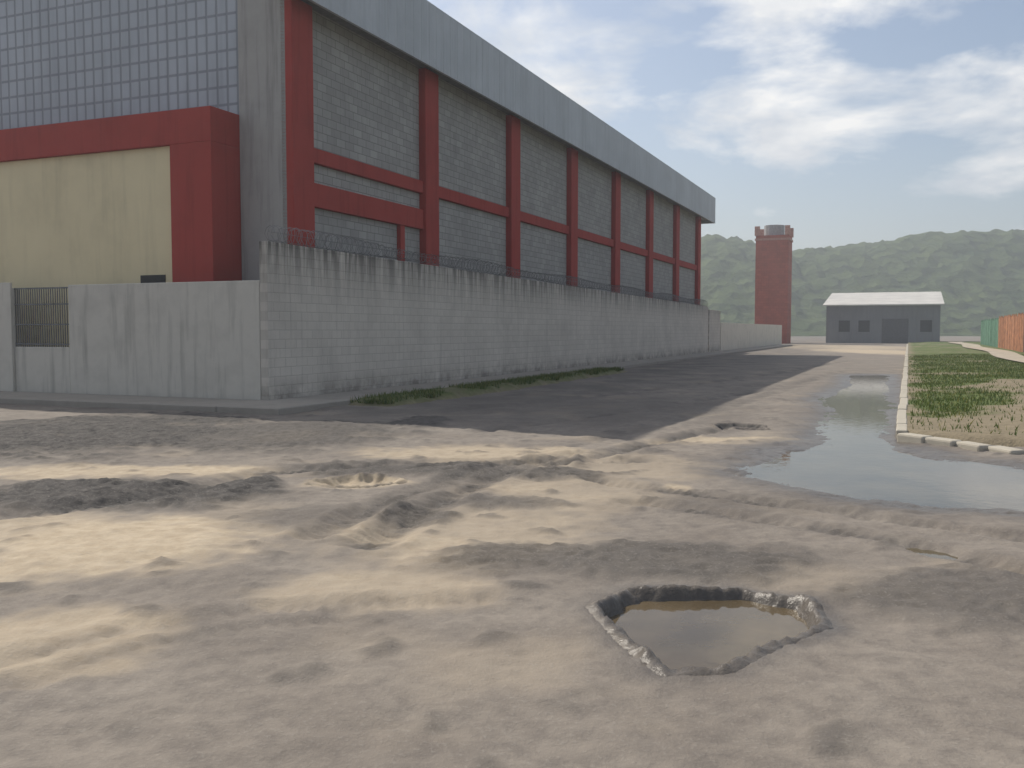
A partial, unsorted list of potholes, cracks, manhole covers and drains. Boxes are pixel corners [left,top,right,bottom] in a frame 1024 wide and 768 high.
pothole [301,472,408,489]
pothole [709,422,771,431]
pothole [586,584,834,677]
